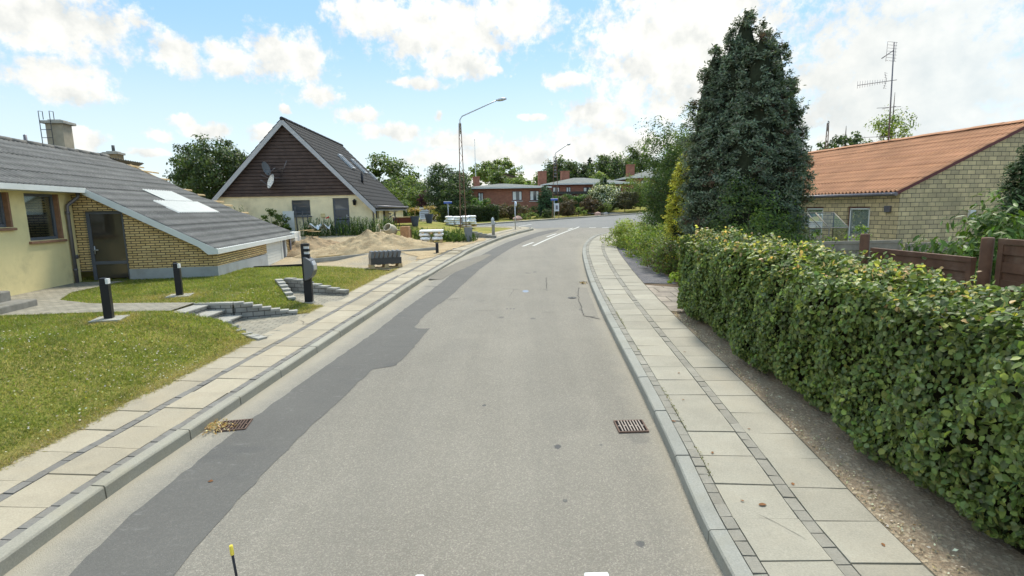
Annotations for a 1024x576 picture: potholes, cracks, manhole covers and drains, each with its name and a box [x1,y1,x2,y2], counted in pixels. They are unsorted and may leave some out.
drain grate [613,419,649,433]
drain grate [215,418,253,433]
